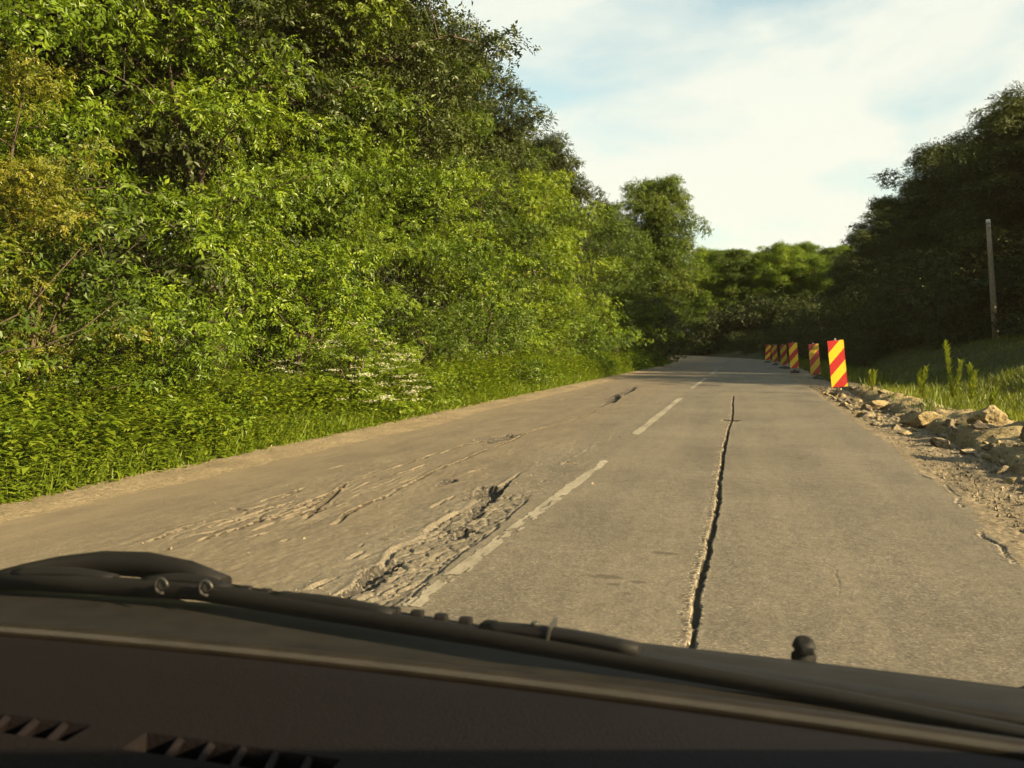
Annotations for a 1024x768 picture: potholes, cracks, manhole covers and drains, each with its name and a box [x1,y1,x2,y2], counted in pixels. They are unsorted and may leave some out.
pothole [461,485,497,501]
pothole [475,481,512,512]
pothole [605,394,623,405]
pothole [466,509,488,523]
pothole [355,559,405,589]
pothole [448,526,477,541]
crack [672,395,751,649]
crack [821,556,844,598]
pothole [480,434,521,445]
crack [145,403,606,607]
pothole [333,574,392,598]
